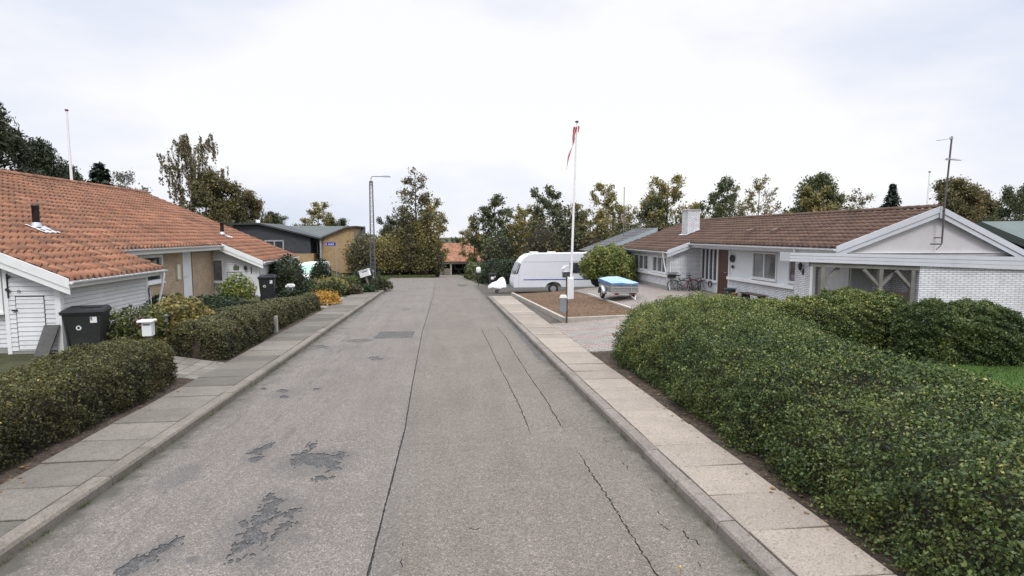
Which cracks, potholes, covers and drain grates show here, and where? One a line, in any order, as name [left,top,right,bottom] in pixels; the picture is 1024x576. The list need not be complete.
pothole [224,492,302,565]
crack [575,439,702,576]
pothole [290,440,349,482]
crack [481,324,565,432]
pothole [246,442,276,463]
pothole [113,535,185,576]
